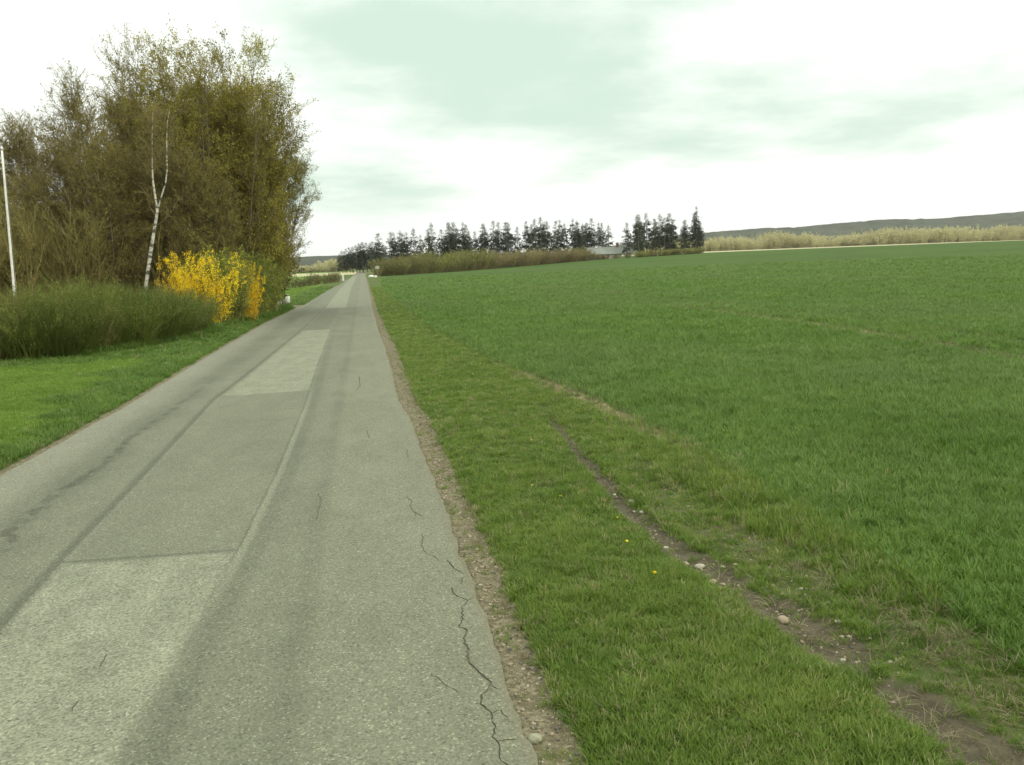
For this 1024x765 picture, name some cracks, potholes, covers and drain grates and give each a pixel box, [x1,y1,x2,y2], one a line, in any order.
crack [421,535,519,765]
